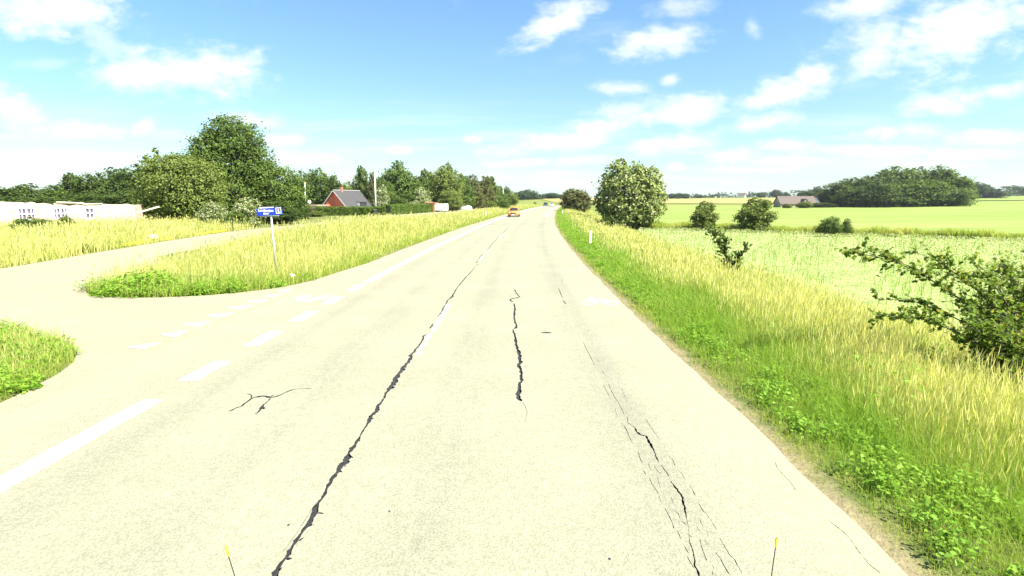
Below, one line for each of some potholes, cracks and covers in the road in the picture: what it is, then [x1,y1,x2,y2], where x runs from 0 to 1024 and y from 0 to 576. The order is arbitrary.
crack [230,227,509,576]
crack [583,342,742,576]
crack [509,290,527,420]
